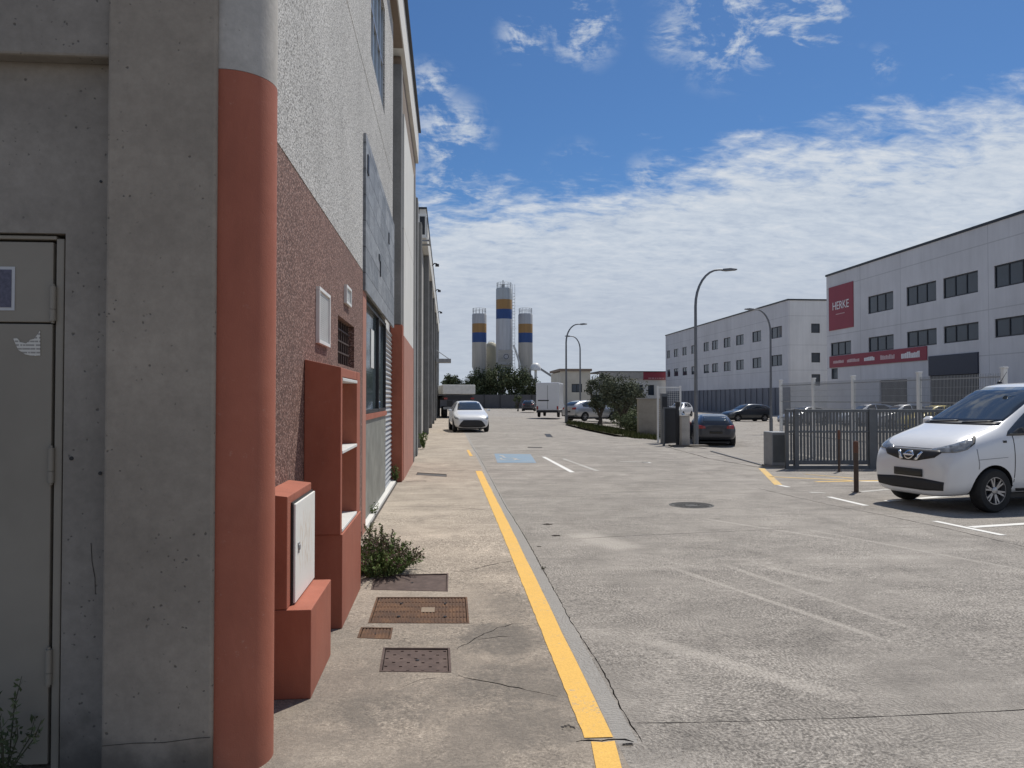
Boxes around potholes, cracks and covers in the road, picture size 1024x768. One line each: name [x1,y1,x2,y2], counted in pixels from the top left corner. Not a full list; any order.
crack [400,675,553,696]
crack [457,623,516,649]
manhole cover [371,573,448,592]
manhole cover [379,647,451,673]
